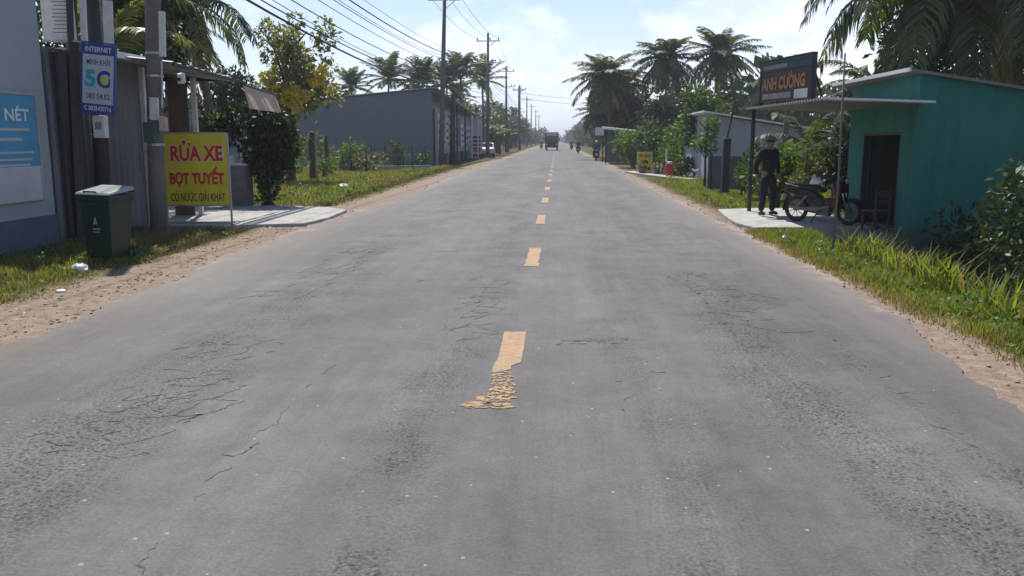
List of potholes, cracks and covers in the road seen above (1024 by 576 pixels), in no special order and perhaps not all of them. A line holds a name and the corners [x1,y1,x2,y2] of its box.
crack [555,337,625,346]
crack [28,340,279,458]
crack [444,278,509,340]
crack [669,271,813,352]
crack [134,364,336,575]
